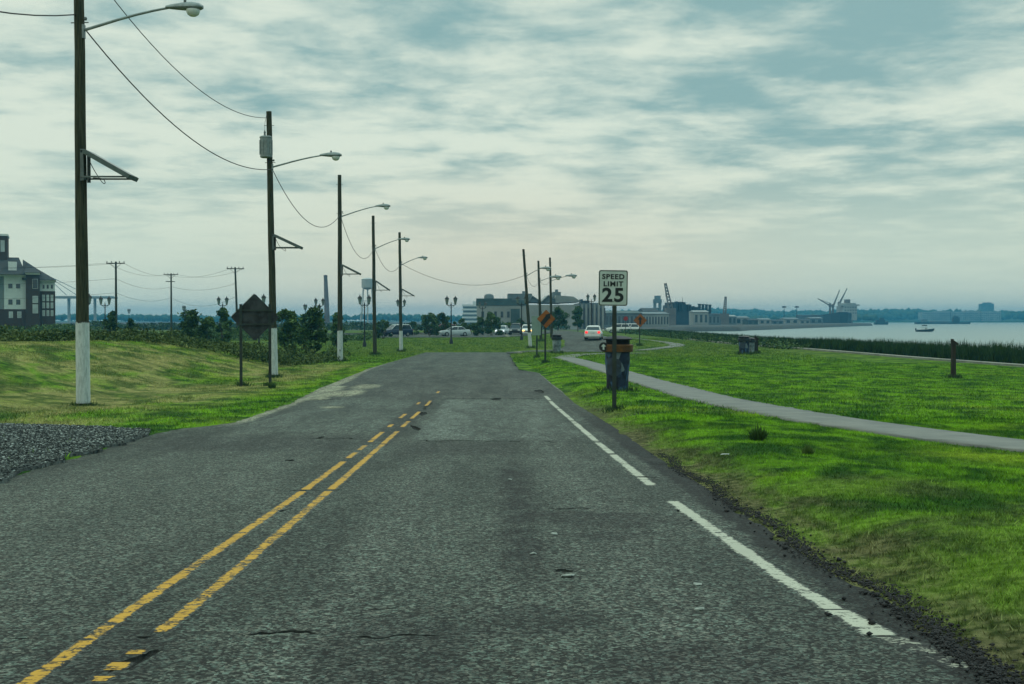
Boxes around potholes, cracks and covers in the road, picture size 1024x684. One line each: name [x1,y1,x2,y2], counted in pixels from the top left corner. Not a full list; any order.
crack [240,630,442,639]
